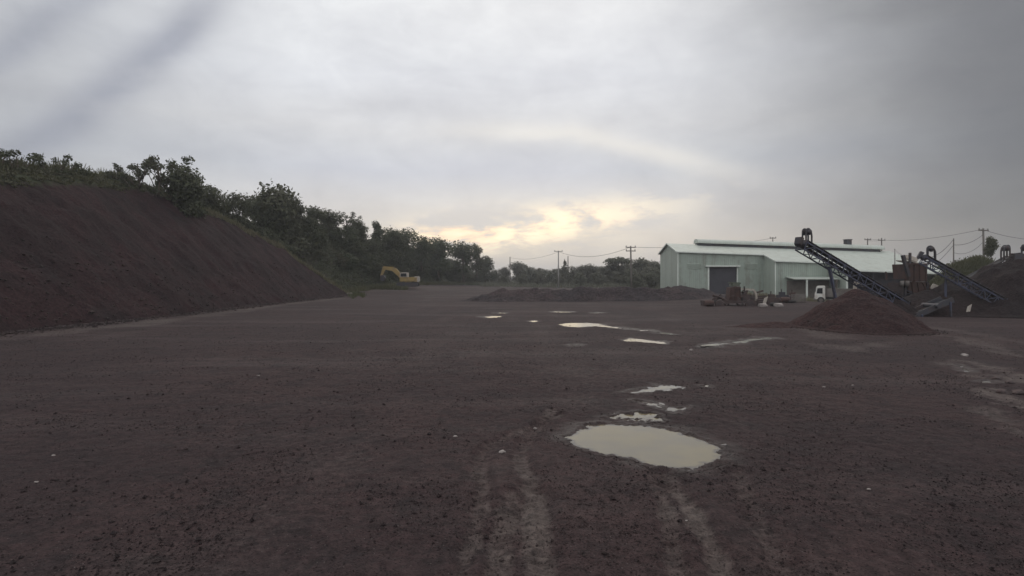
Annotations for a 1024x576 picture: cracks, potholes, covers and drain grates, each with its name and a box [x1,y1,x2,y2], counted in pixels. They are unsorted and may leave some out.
pothole [551,323,664,332]
pothole [557,420,734,479]
pothole [600,410,670,423]
pothole [619,383,687,395]
